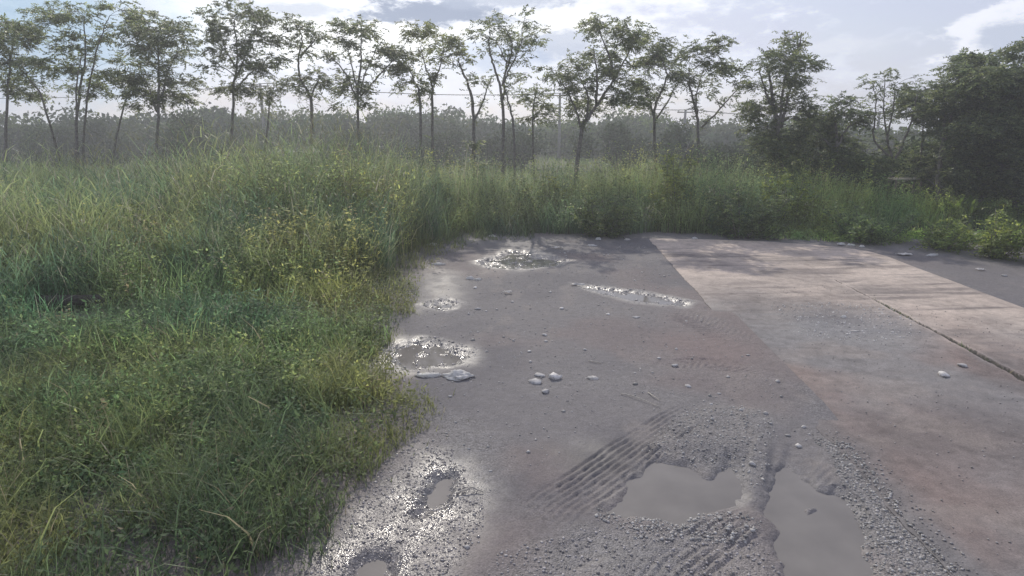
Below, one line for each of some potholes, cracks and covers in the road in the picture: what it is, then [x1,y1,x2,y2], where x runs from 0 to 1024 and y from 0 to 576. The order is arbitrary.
pothole [591,447,754,533]
pothole [380,336,478,371]
pothole [417,296,459,311]
pothole [471,249,573,270]
pothole [398,466,474,521]
pothole [750,461,889,576]
pothole [572,284,696,307]
pothole [330,536,422,576]
